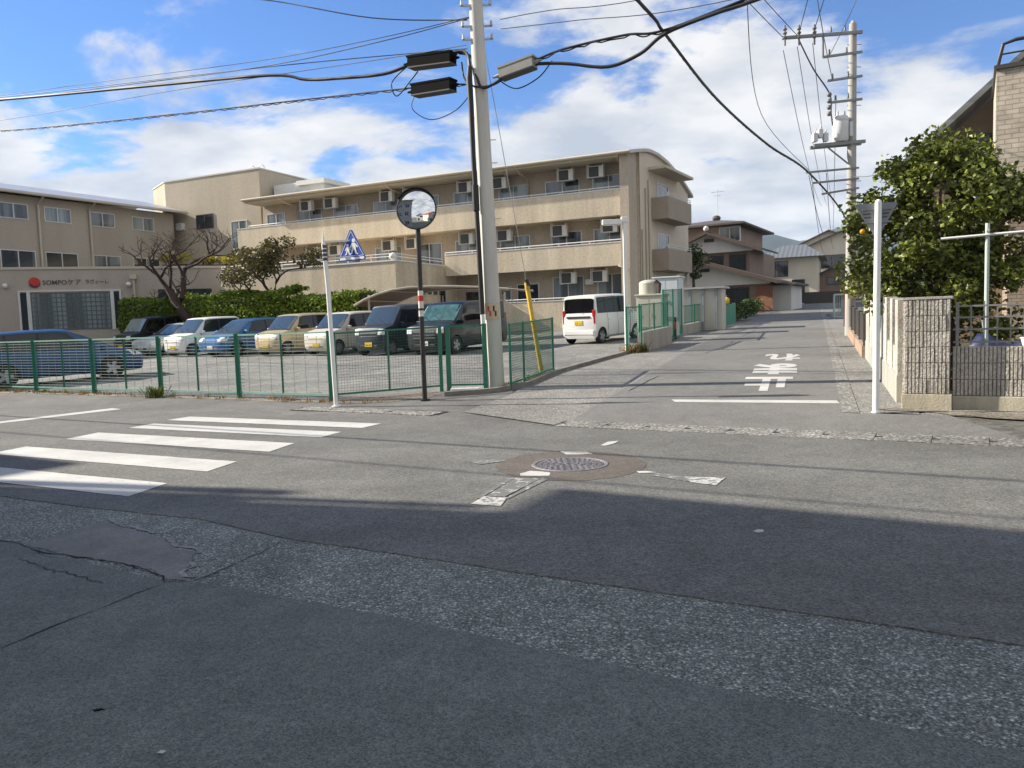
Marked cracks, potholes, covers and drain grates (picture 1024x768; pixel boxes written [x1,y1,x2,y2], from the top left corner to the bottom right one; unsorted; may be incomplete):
manhole cover [532,457,608,471]
crack [0,540,186,648]
